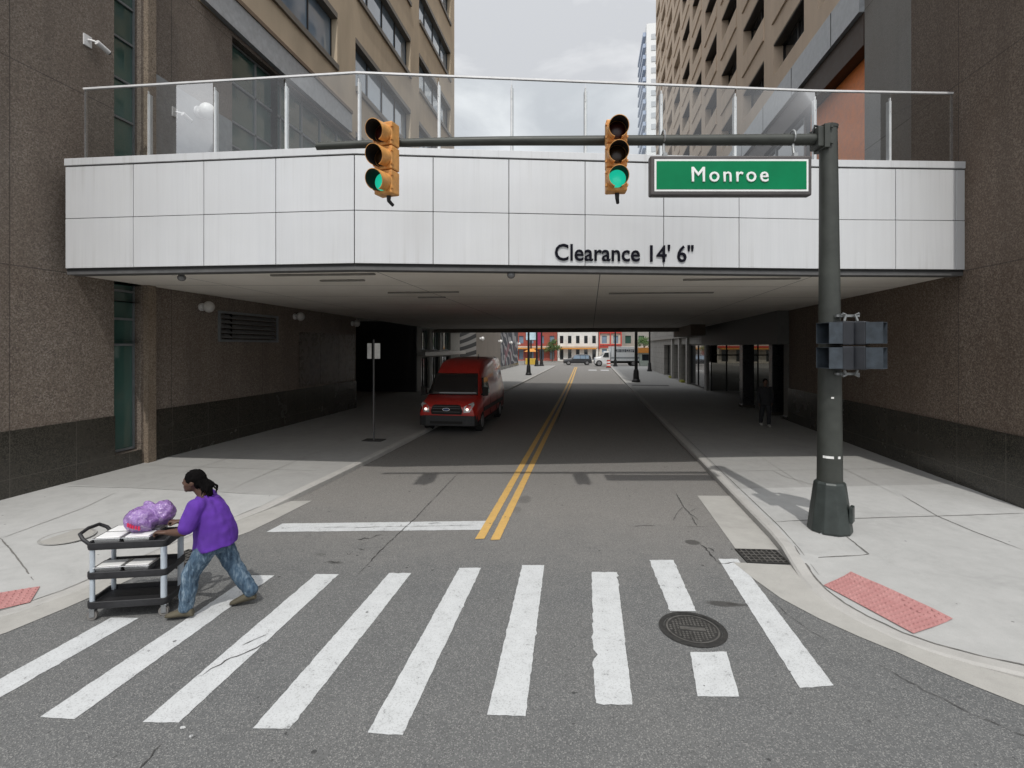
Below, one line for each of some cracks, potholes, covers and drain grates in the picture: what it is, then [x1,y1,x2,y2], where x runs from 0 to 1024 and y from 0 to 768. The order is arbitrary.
crack [310,480,454,570]
manhole cover [659,612,728,648]
drain grate [735,548,790,565]
manhole cover [37,528,97,545]
crack [880,665,1023,735]
crack [193,635,265,678]
